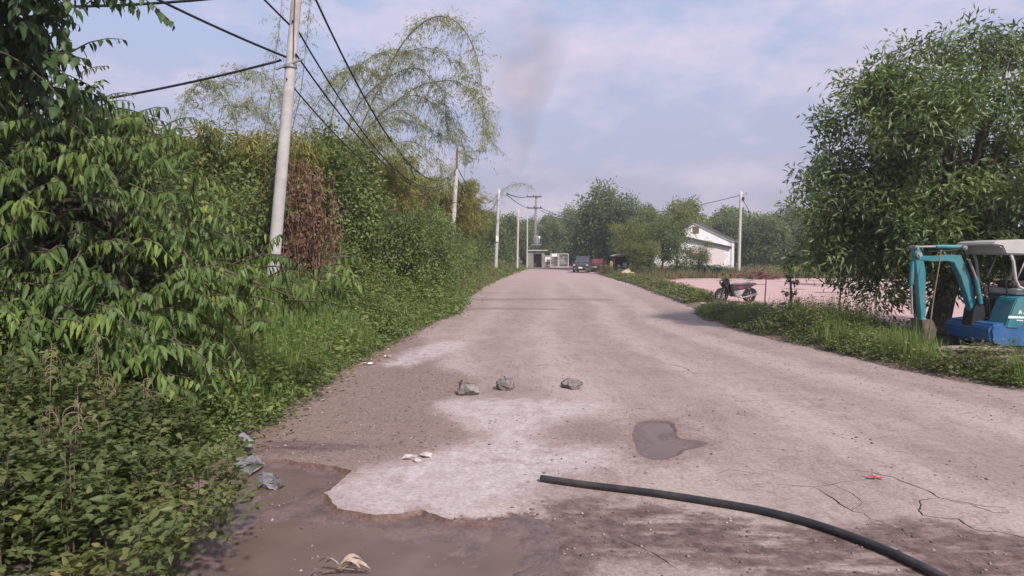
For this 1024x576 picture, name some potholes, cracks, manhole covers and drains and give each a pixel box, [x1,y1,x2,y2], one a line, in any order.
crack [756,469,1023,538]
pothole [185,459,560,576]
pothole [632,420,708,460]
